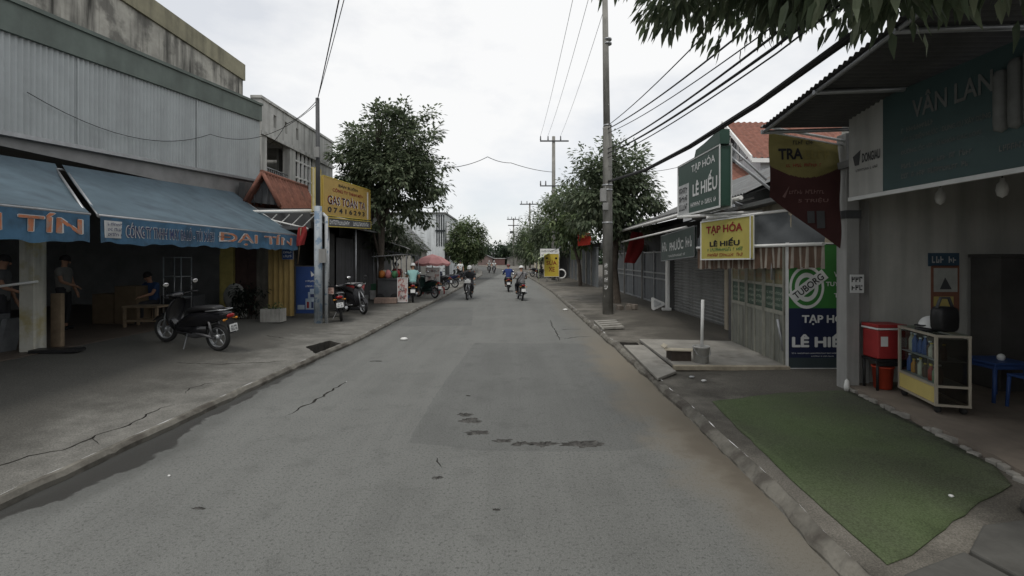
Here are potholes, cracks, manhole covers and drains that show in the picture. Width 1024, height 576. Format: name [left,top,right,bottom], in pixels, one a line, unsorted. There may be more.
crack [177,361,276,393]
crack [292,382,346,414]
crack [0,404,174,466]
